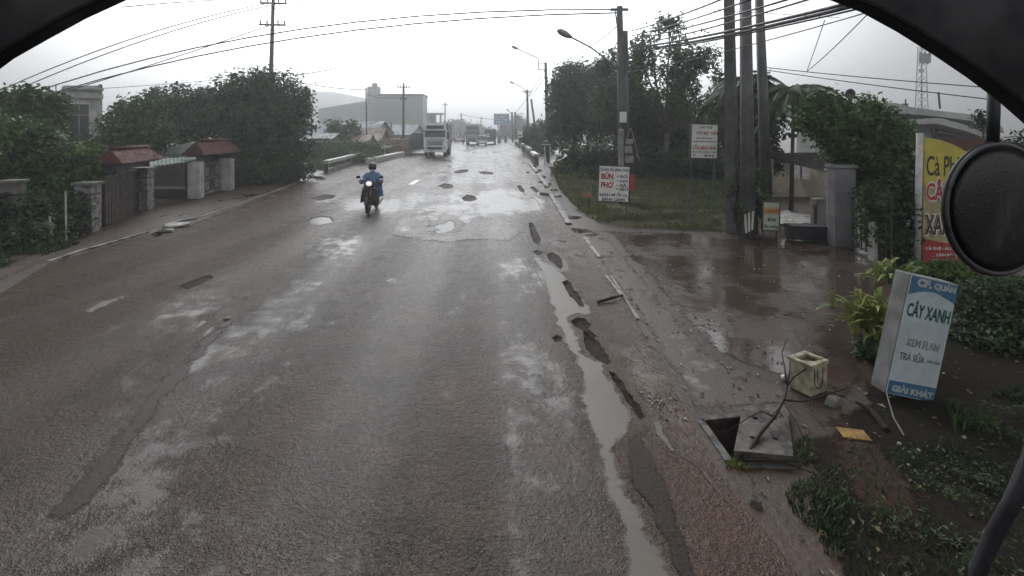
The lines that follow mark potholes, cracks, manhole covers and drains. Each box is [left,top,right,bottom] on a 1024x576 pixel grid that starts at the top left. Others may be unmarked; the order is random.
pothole [608,371,645,420]
pothole [307,216,334,225]
pothole [571,318,597,339]
pothole [529,223,541,245]
pothole [547,252,563,270]
pothole [562,280,584,307]
pothole [583,331,612,365]
manhole cover [734,404,794,464]
